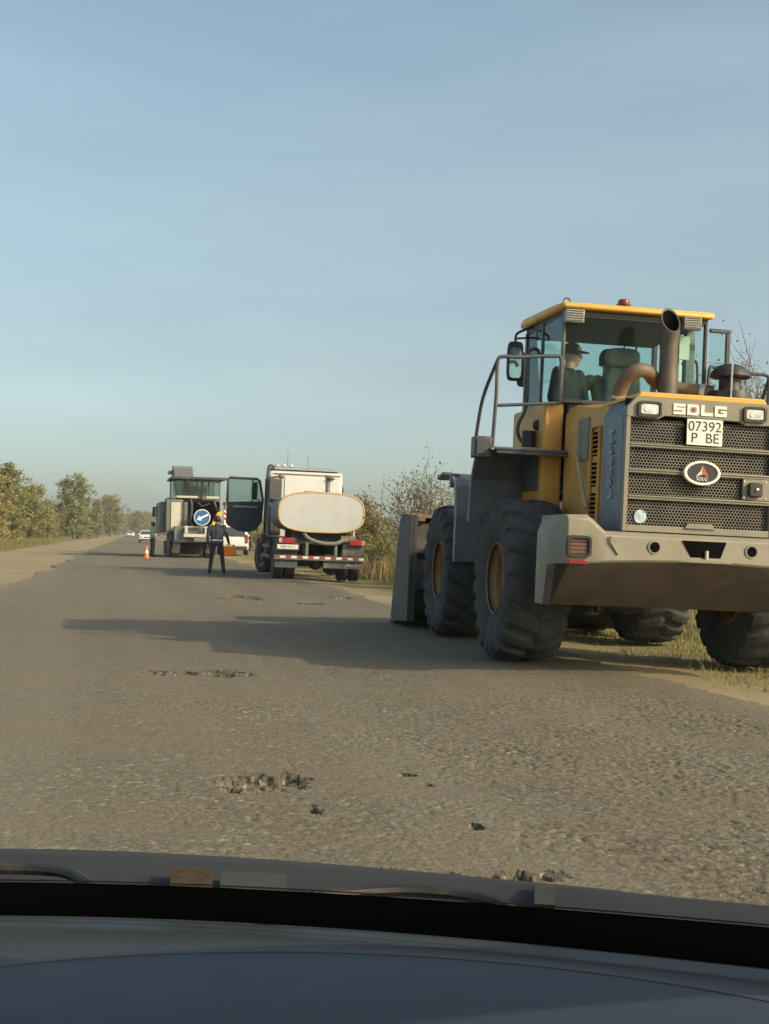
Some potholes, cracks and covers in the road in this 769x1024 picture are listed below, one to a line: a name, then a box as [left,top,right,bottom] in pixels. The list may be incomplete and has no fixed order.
pothole [302,804,325,817]
pothole [131,669,257,679]
pothole [374,866,579,883]
pothole [461,822,488,830]
pothole [204,771,315,795]
